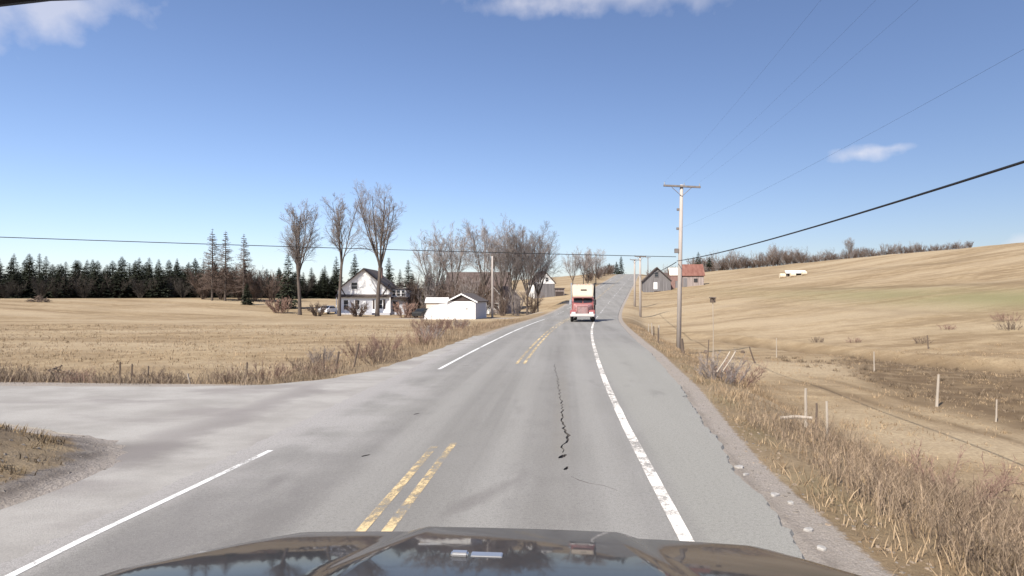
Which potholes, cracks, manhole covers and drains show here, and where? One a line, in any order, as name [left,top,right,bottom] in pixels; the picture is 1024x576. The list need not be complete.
crack [554,367,613,489]
